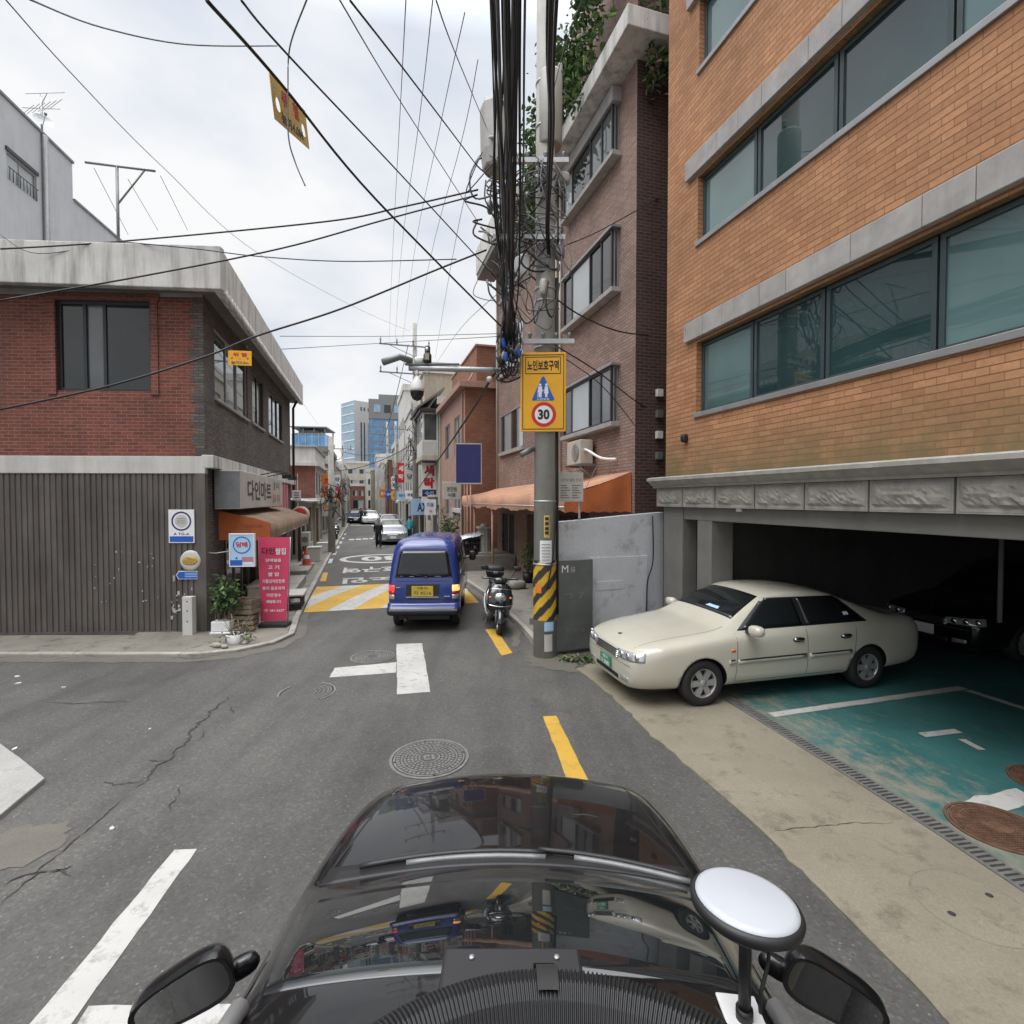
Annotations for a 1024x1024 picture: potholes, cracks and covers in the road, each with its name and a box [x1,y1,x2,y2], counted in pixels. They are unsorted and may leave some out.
crack [780,822,893,831]
drain grate [725,698,1024,892]
manhole cover [277,682,336,700]
manhole cover [1005,764,1024,786]
crack [1,697,234,904]
manhole cover [389,739,469,780]
manhole cover [350,650,395,664]
manhole cover [943,801,1024,855]
manhole cover [909,869,1024,949]
